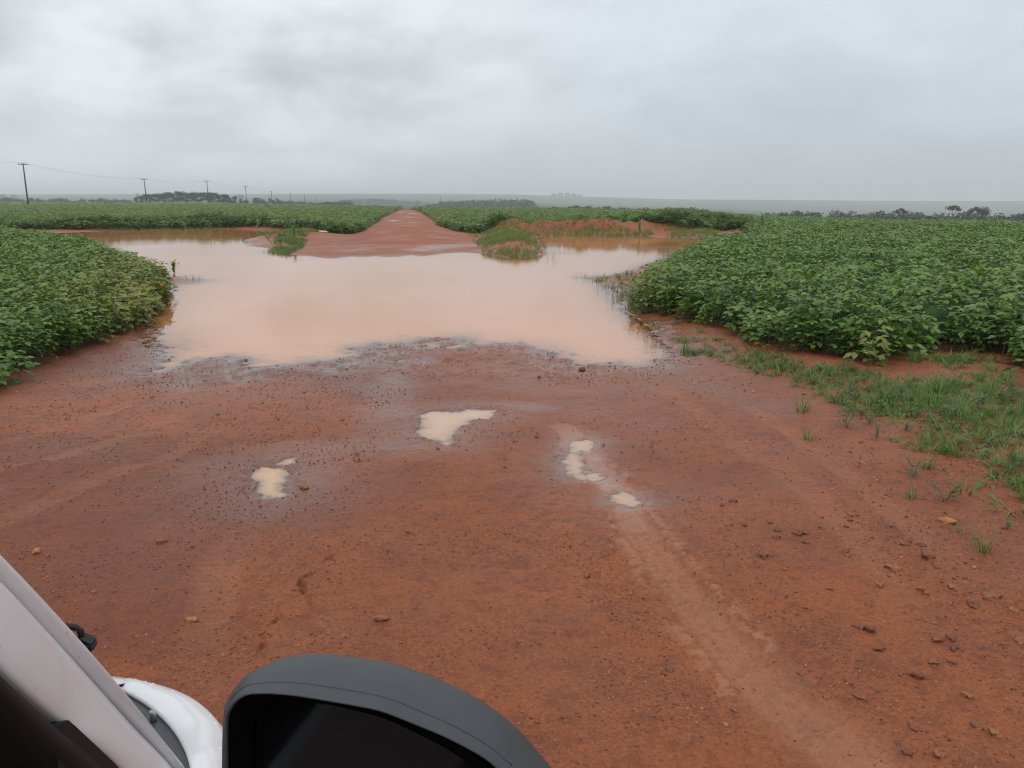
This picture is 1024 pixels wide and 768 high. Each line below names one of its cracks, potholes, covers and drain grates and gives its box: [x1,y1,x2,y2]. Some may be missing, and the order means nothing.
pothole [554,435,654,509]
pothole [239,452,309,502]
pothole [402,404,507,447]
